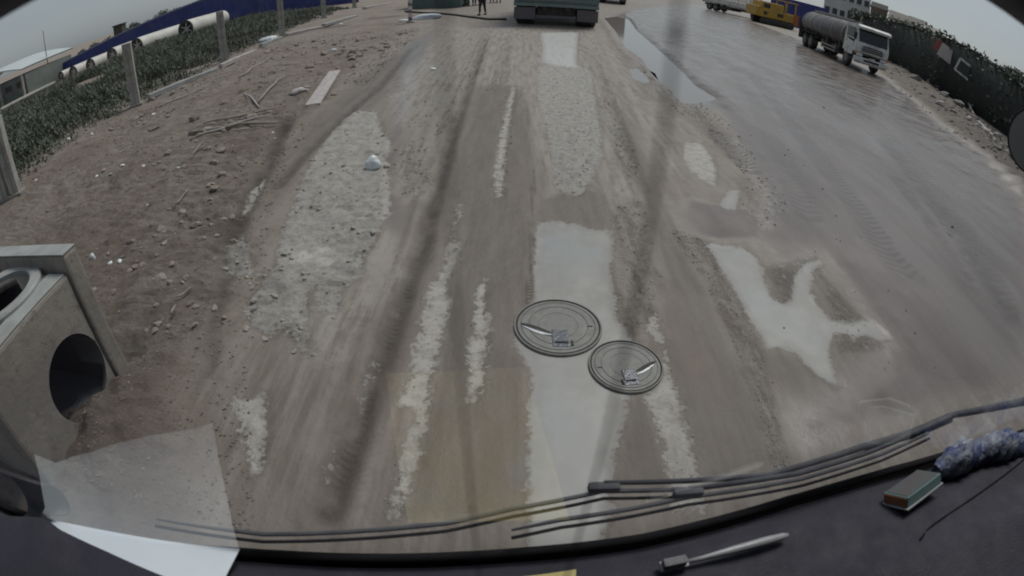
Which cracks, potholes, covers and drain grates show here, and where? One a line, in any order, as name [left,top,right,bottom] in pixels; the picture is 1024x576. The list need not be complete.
manhole cover [514,299,602,357]
manhole cover [588,340,664,394]
